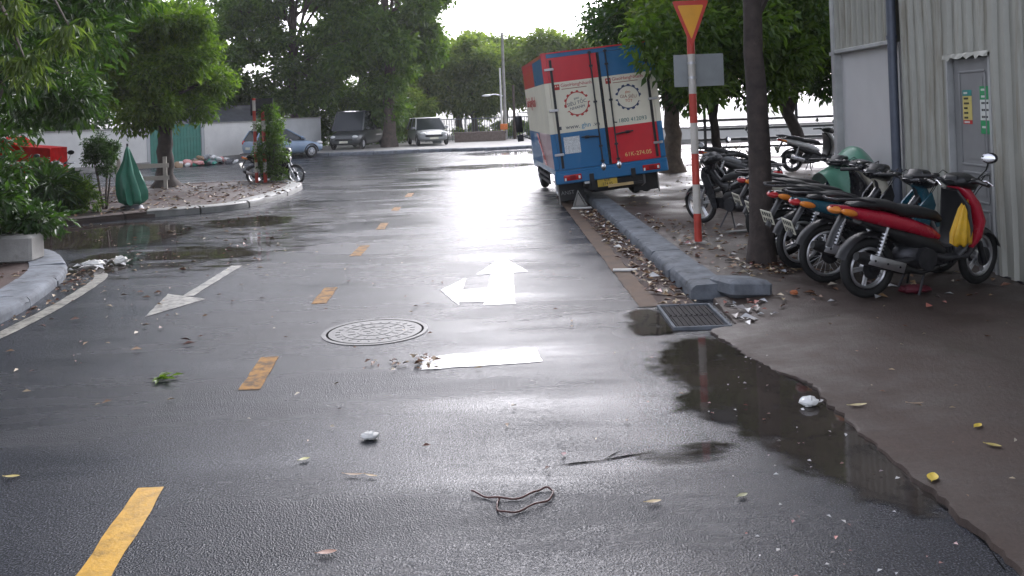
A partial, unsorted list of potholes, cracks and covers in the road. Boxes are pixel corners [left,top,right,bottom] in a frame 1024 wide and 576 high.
manhole cover [321,318,428,346]
crack [555,450,642,466]
drain grate [657,303,732,331]
